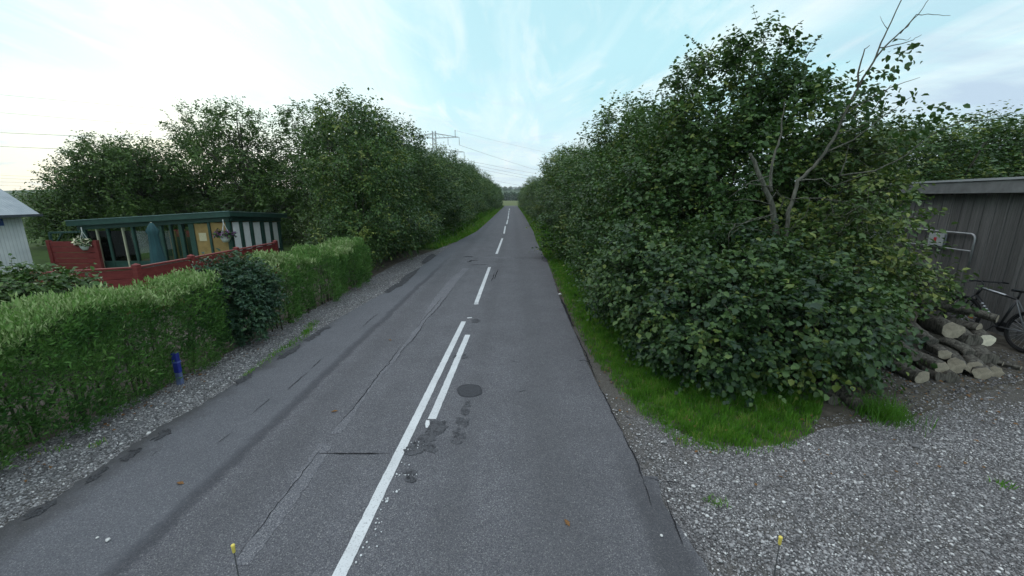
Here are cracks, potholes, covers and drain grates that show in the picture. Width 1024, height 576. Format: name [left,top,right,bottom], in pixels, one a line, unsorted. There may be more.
manhole cover [457,384,482,397]
crack [236,446,378,559]
